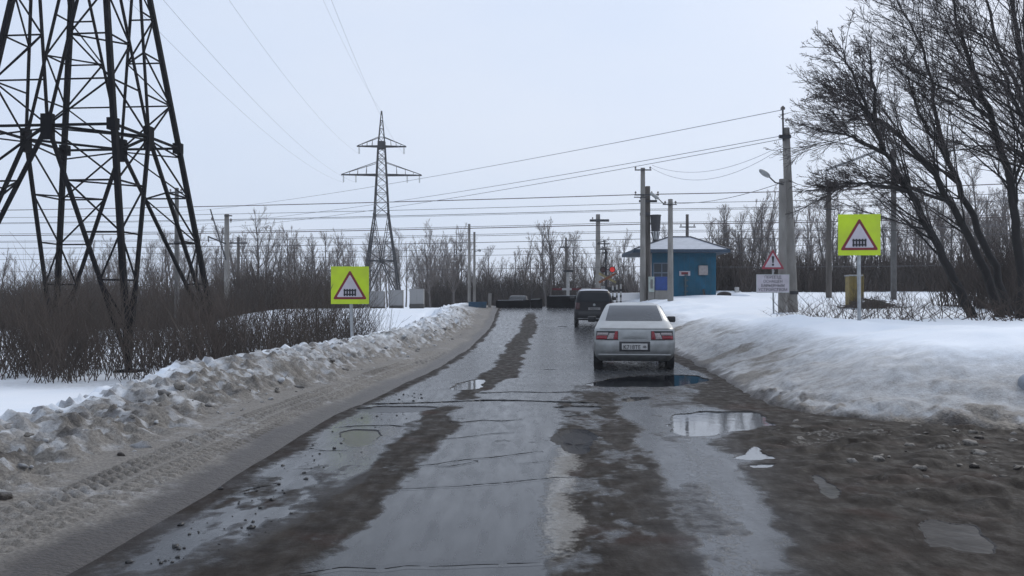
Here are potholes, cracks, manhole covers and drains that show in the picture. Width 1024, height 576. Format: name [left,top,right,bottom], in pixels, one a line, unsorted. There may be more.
pothole [662,410,782,437]
crack [279,560,544,576]
crack [362,391,595,491]
pothole [448,379,487,391]
pothole [334,428,387,448]
pothole [583,374,713,387]
pothole [544,428,603,455]
